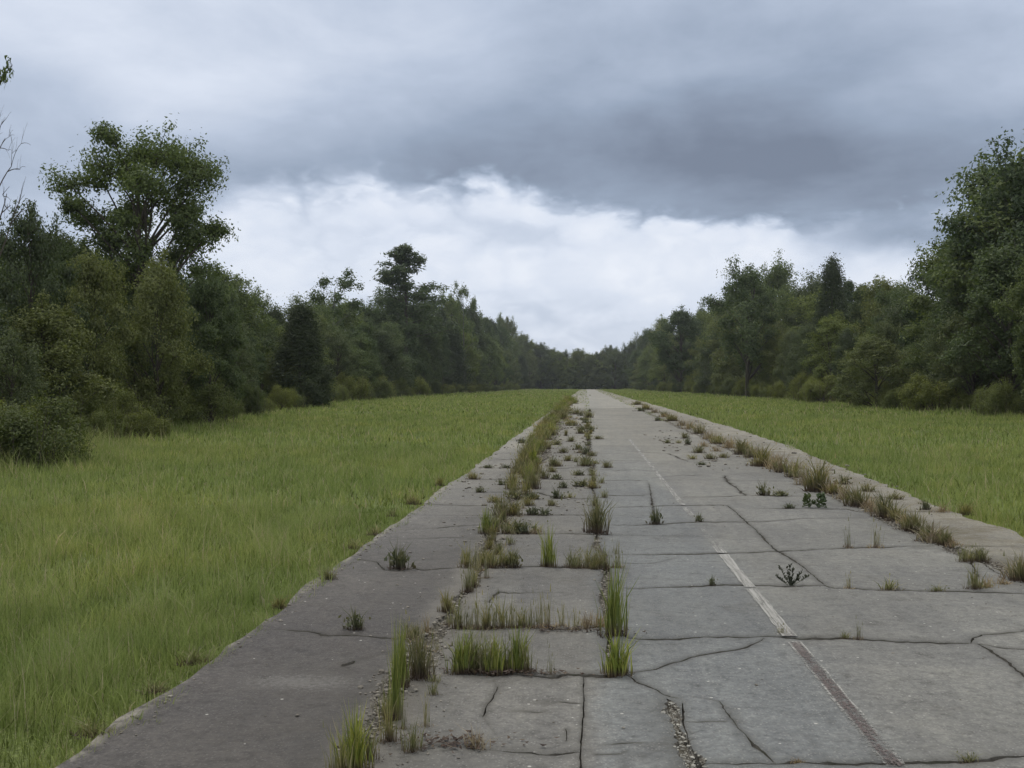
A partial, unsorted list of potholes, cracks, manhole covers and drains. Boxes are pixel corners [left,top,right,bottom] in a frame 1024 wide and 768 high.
crack [436,454,1017,594]
crack [288,630,393,639]
crack [454,626,1024,768]
